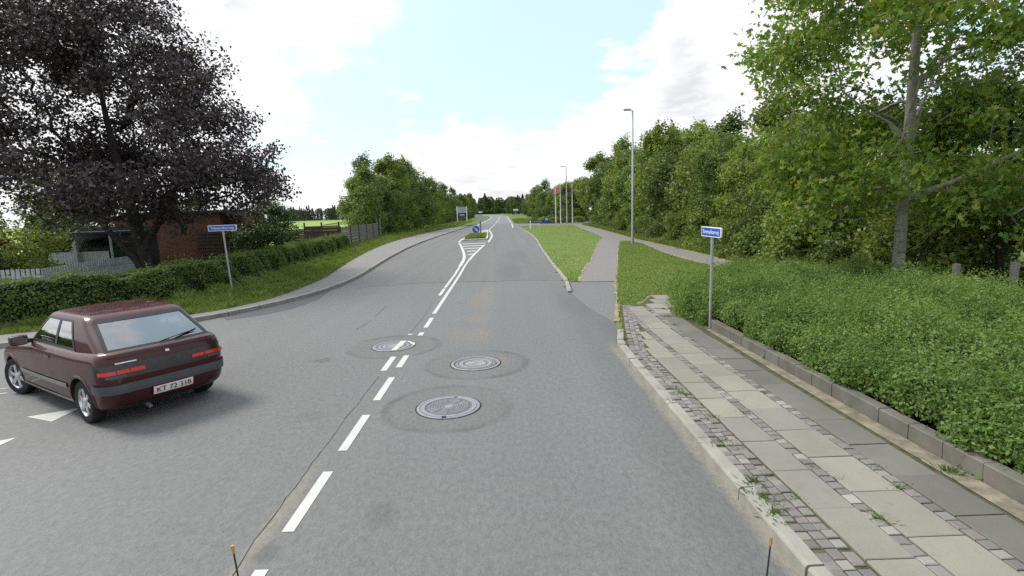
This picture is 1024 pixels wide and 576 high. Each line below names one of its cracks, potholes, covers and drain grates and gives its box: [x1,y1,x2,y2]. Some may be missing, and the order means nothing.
manhole cover [450,356,501,371]
manhole cover [415,395,481,419]
manhole cover [371,341,416,352]
